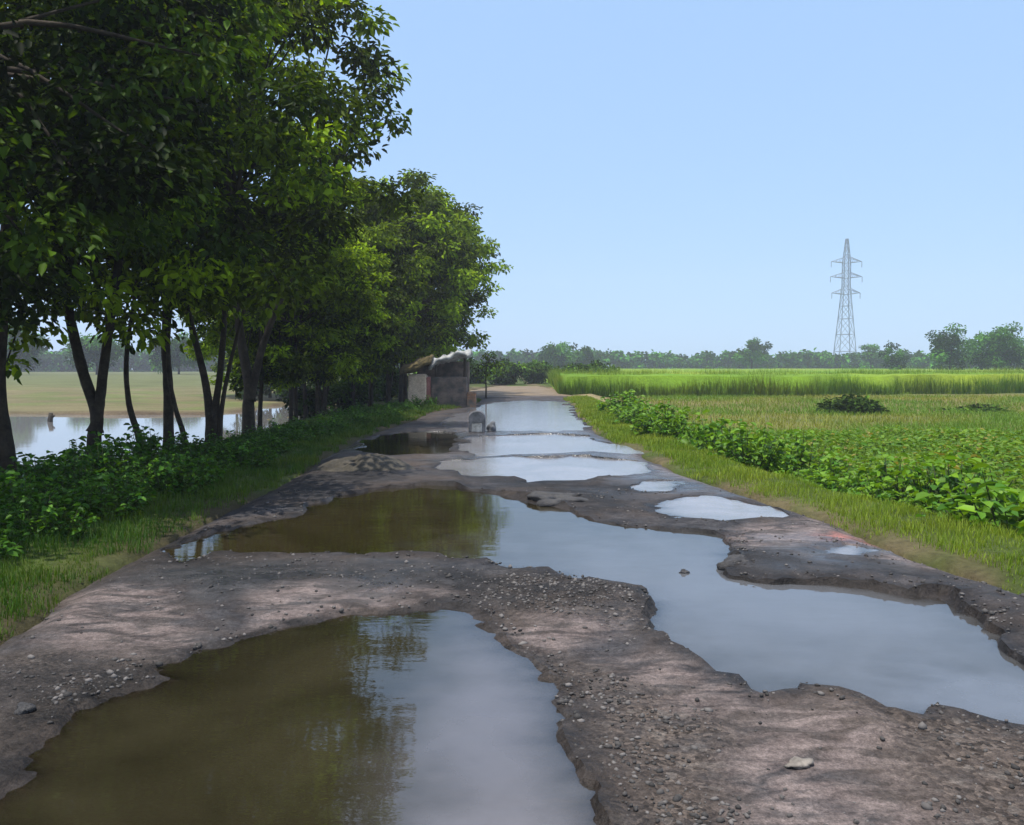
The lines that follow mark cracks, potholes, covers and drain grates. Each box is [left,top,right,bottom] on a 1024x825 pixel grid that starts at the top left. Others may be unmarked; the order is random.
pothole [160,481,1024,724]
pothole [440,400,591,432]
pothole [629,479,689,492]
pothole [354,431,466,455]
pothole [434,454,654,483]
pothole [457,433,648,457]
pothole [0,601,612,825]
